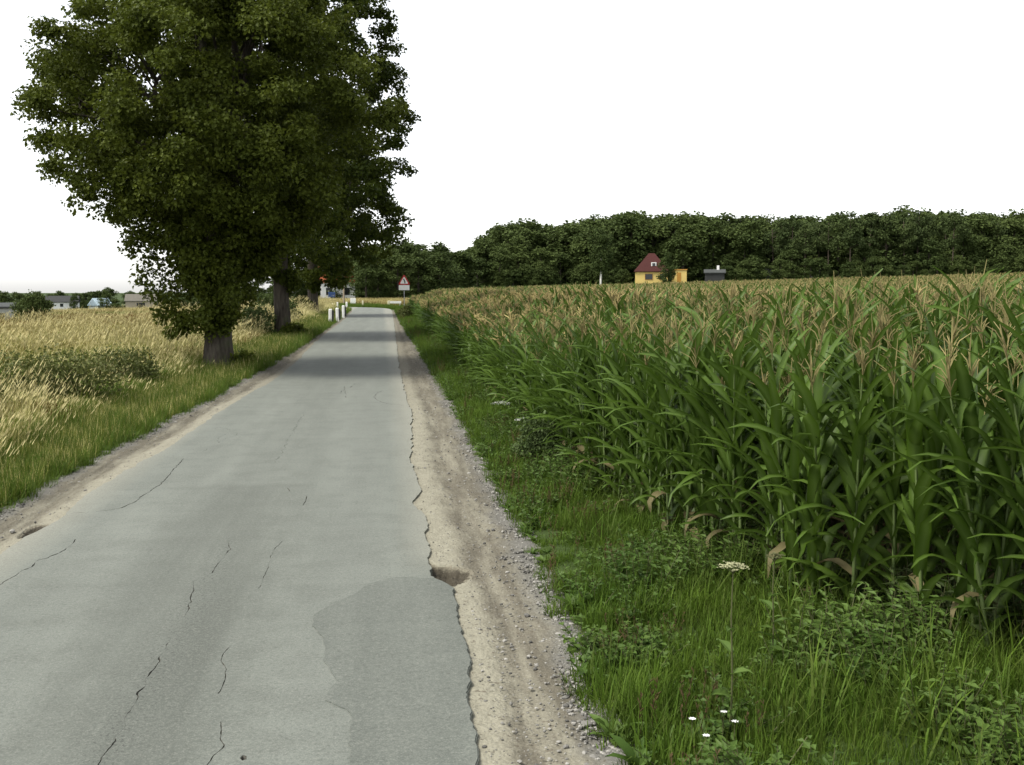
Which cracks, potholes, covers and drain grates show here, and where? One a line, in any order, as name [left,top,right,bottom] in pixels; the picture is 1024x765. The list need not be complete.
crack [207,722,225,765]
pothole [18,524,48,539]
pothole [429,564,476,587]
